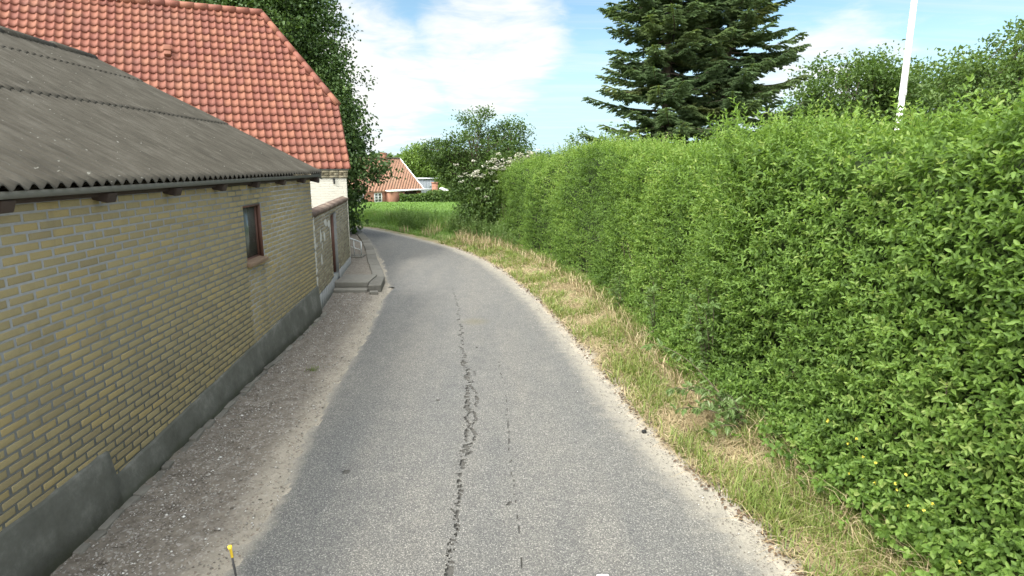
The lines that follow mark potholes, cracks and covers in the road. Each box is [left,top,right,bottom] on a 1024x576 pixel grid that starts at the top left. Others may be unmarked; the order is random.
crack [499,362,523,568]
crack [444,289,479,576]
